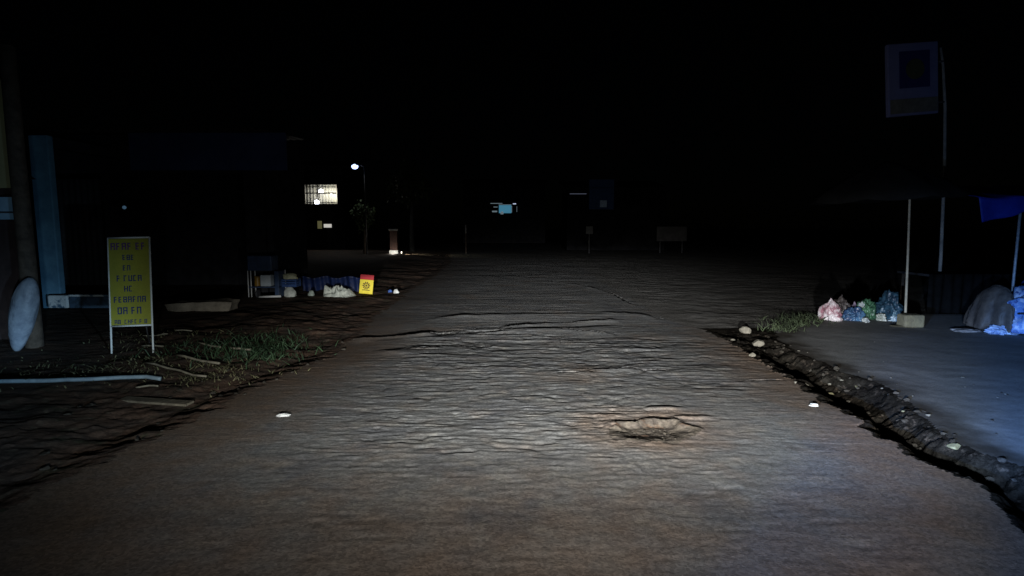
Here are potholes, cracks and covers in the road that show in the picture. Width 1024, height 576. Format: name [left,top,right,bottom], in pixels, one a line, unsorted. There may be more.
pothole [607,418,702,444]
crack [386,314,606,350]
